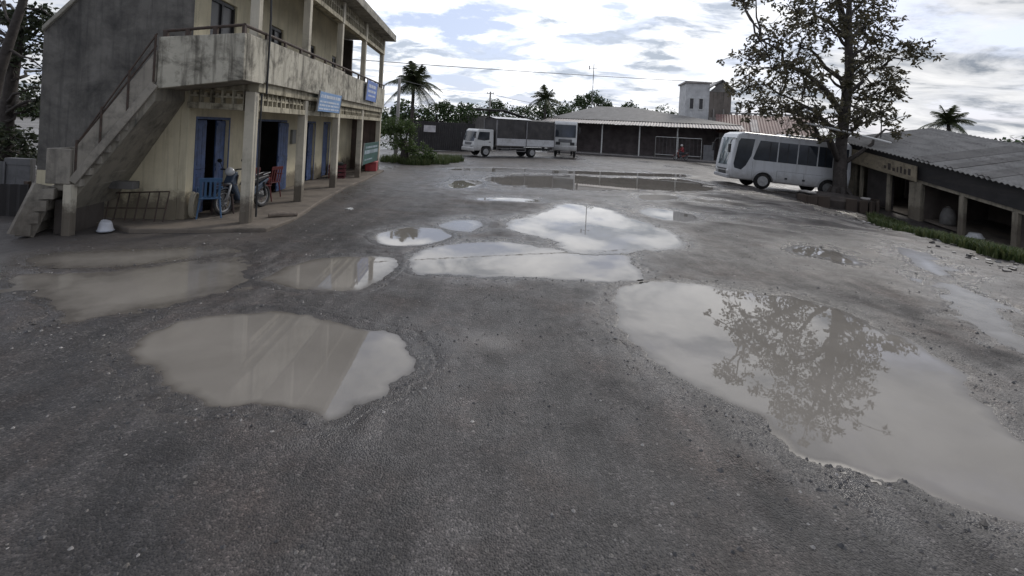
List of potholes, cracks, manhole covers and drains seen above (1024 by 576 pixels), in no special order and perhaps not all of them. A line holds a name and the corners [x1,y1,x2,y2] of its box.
pothole [0,252,283,330]
pothole [633,207,703,222]
pothole [886,244,1024,354]
pothole [502,202,691,255]
pothole [433,217,490,234]
pothole [248,253,409,296]
pothole [364,225,459,247]
pothole [448,167,688,177]
pothole [104,303,437,431]
pothole [443,180,487,189]
pothole [780,243,870,267]
pothole [483,173,725,192]
